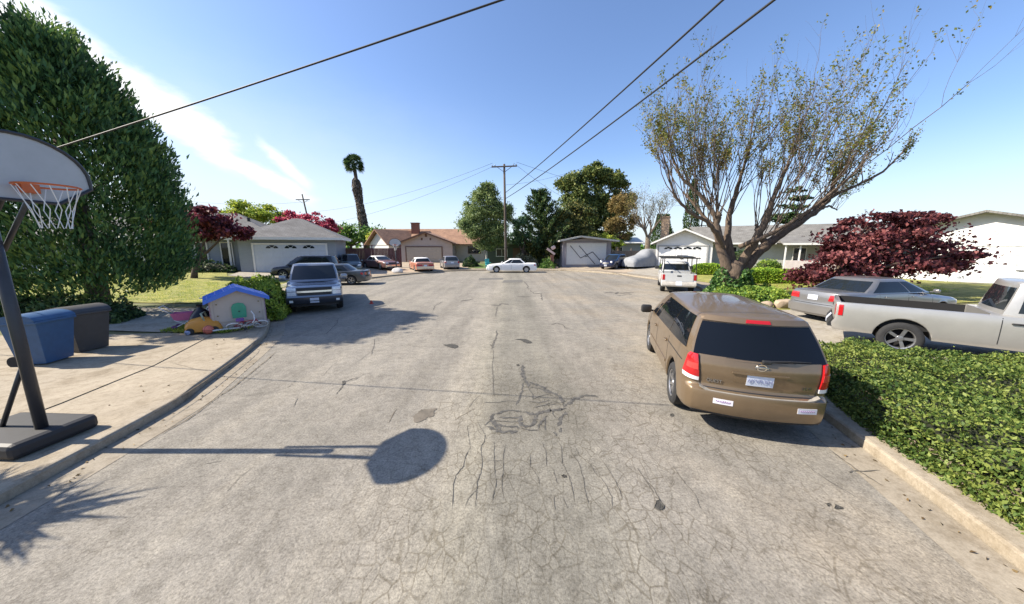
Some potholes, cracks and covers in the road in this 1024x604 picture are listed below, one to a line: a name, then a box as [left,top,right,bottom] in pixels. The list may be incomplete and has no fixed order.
crack [490,281,543,398]
crack [530,443,621,509]
crack [452,402,505,506]
